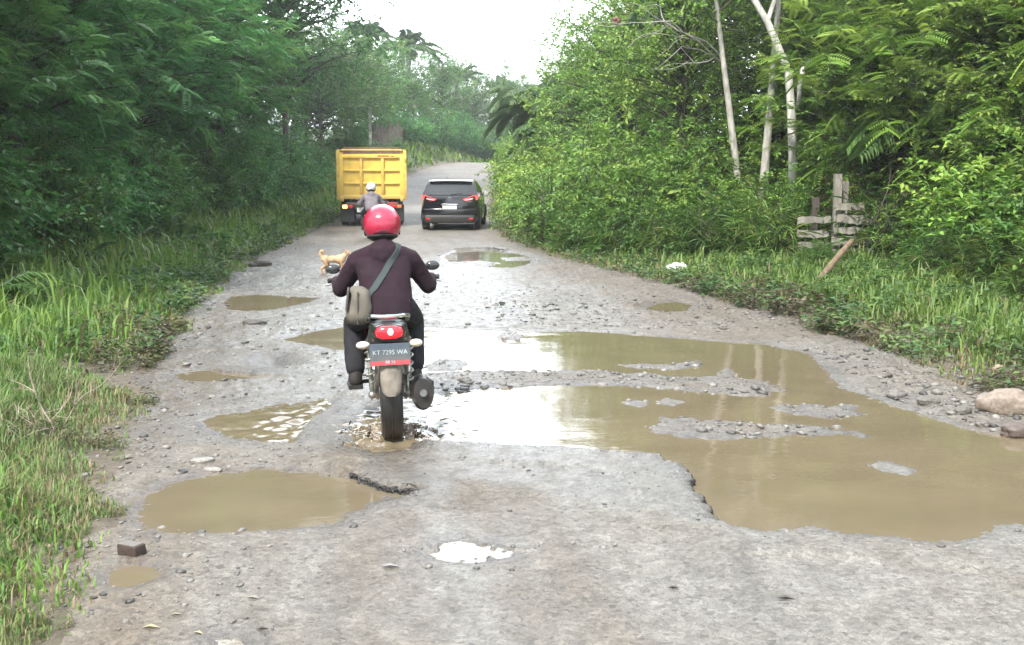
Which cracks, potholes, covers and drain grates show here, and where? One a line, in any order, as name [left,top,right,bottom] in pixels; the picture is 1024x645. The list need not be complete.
pothole [183,396,358,446]
pothole [334,324,1024,548]
pothole [161,365,310,383]
pothole [408,532,537,569]
pothole [271,325,344,351]
pothole [84,555,181,595]
pothole [117,452,419,539]
pothole [213,293,326,311]
pothole [439,247,537,268]
pothole [637,299,701,313]
